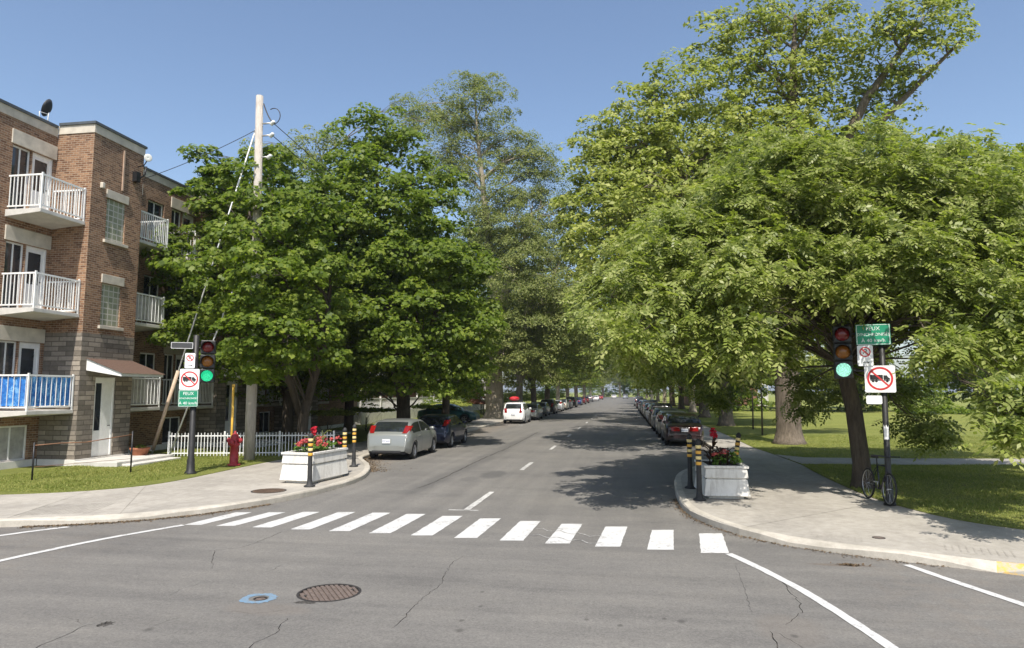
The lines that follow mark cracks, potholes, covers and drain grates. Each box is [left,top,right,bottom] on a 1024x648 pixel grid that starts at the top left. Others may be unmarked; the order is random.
crack [770,582,803,648]
manhole cover [296,584,361,602]
